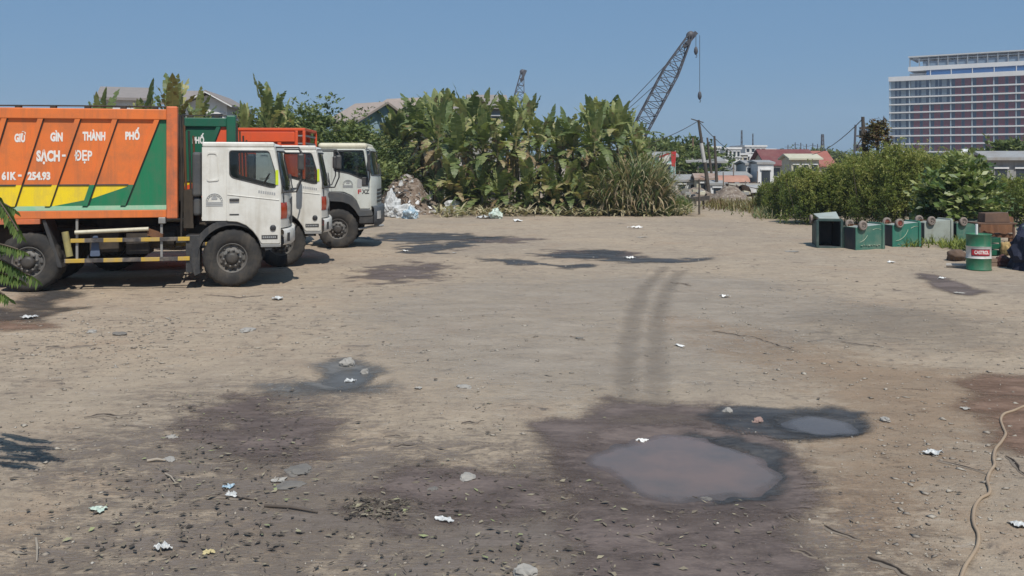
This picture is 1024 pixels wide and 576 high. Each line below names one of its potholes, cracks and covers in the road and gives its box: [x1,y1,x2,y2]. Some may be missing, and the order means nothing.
pothole [774,411,870,438]
pothole [303,357,389,390]
pothole [552,422,825,518]
crack [712,331,798,352]
